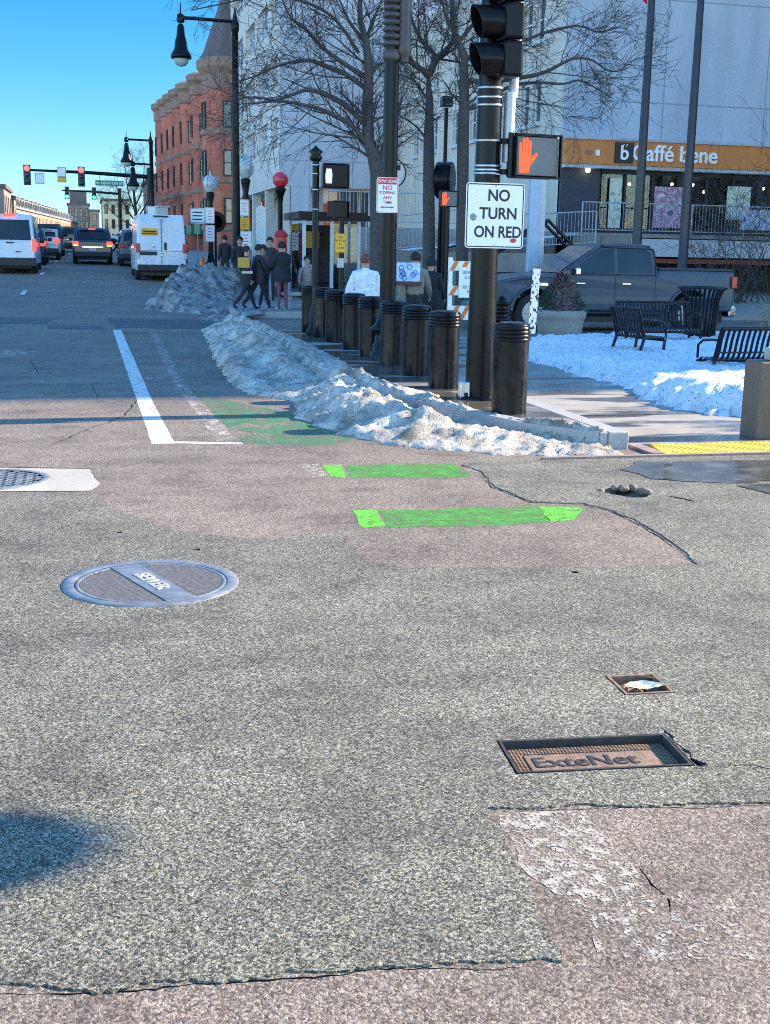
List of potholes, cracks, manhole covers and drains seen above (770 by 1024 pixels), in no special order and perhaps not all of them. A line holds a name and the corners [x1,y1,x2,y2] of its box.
crack [483,478,686,557]
manhole cover [61,559,239,607]
crack [641,871,670,911]
utility cover [498,734,693,774]
crack [34,400,137,453]
pothole [595,484,652,497]
